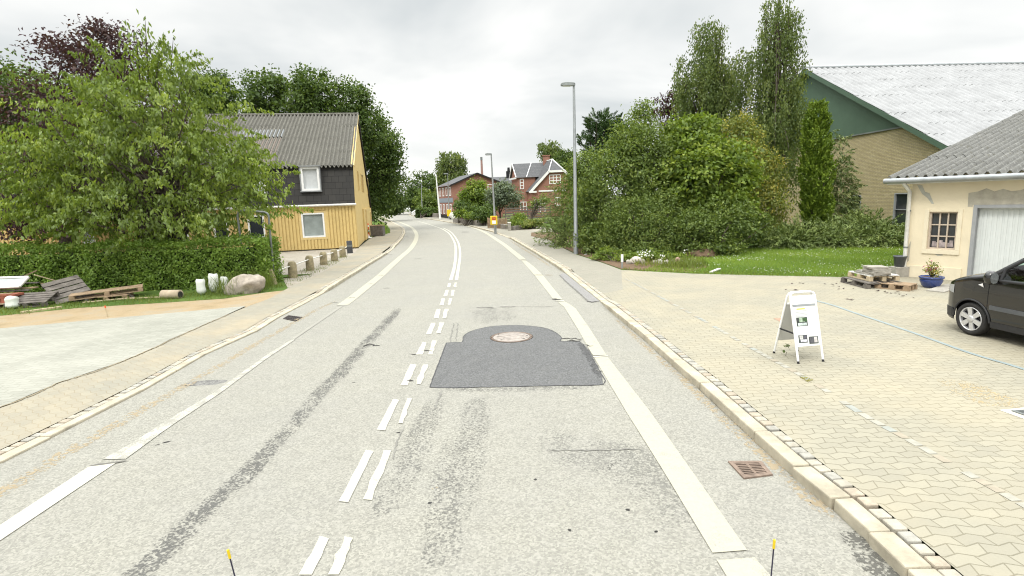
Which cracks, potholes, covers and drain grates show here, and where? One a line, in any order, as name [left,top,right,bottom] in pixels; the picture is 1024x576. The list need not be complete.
drain grate [728,461,773,479]
manhole cover [490,332,533,343]
